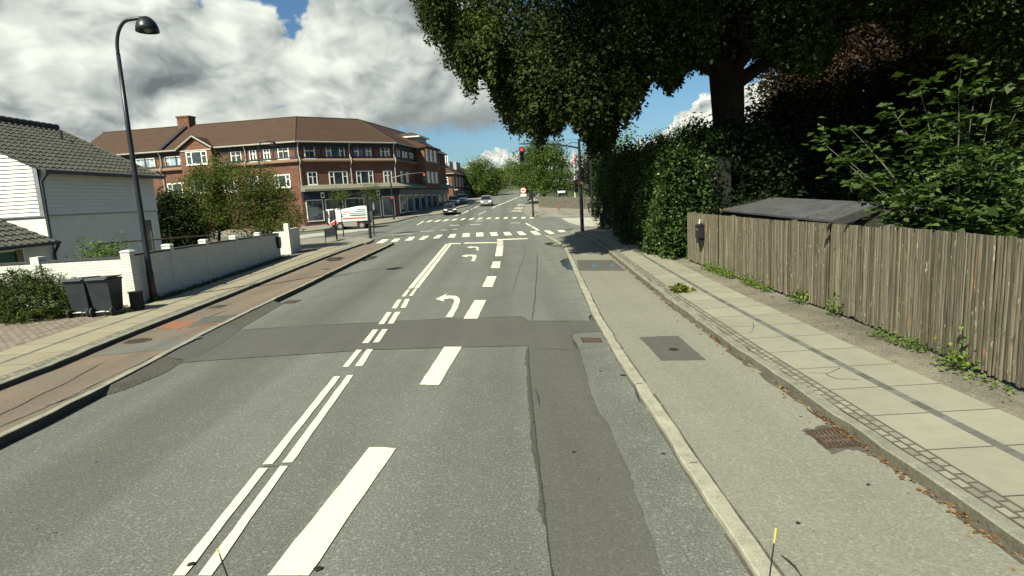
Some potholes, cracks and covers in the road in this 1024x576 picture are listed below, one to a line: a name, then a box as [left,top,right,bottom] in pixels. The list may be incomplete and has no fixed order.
crack [513,243,538,320]
crack [0,356,153,426]
drain grate [806,427,862,449]
